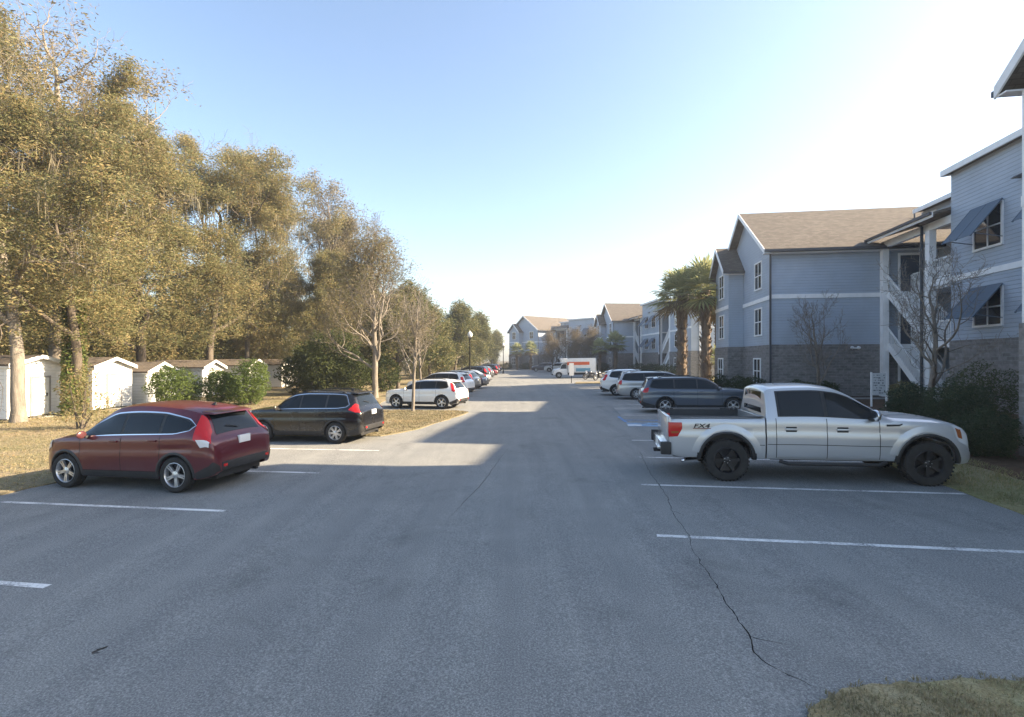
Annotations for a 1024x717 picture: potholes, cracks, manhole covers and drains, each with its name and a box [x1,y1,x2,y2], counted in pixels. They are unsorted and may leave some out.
crack [641,454,811,686]
